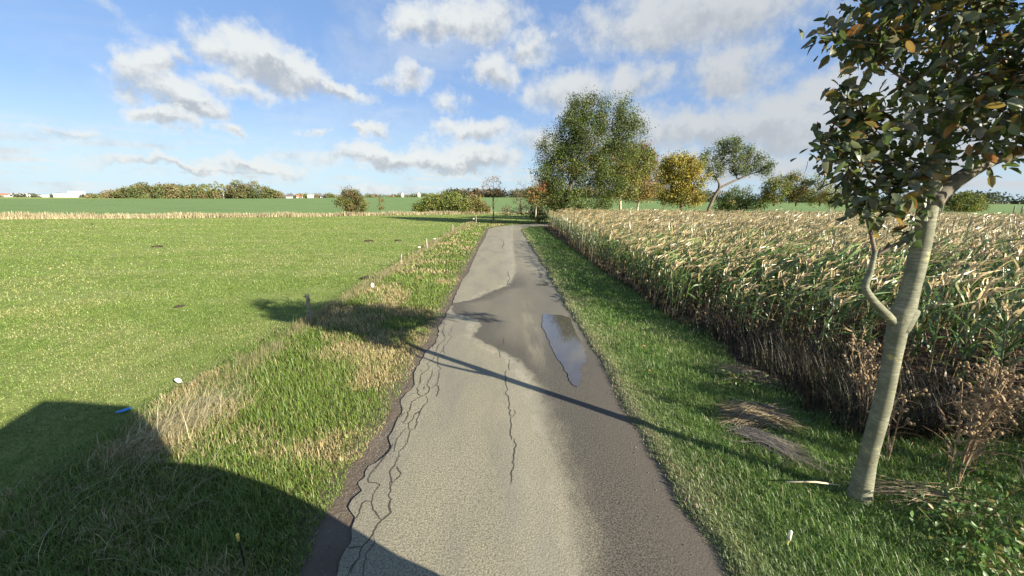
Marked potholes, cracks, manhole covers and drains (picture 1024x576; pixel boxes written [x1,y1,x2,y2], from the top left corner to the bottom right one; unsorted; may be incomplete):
crack [347,328,452,576]
crack [498,338,517,482]
